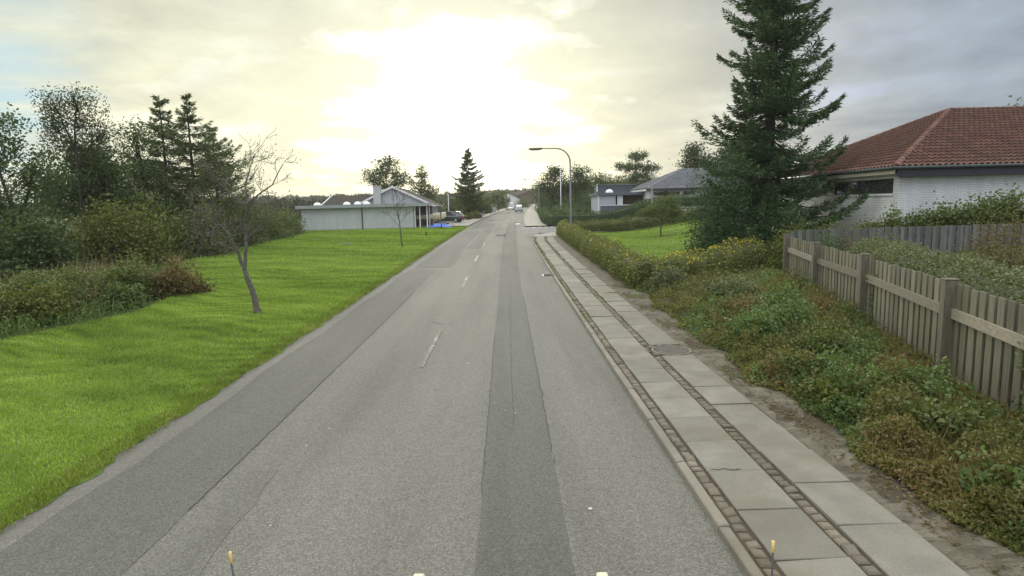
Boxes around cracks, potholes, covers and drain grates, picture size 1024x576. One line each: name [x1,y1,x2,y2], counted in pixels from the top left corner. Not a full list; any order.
manhole cover [644,344,692,356]
